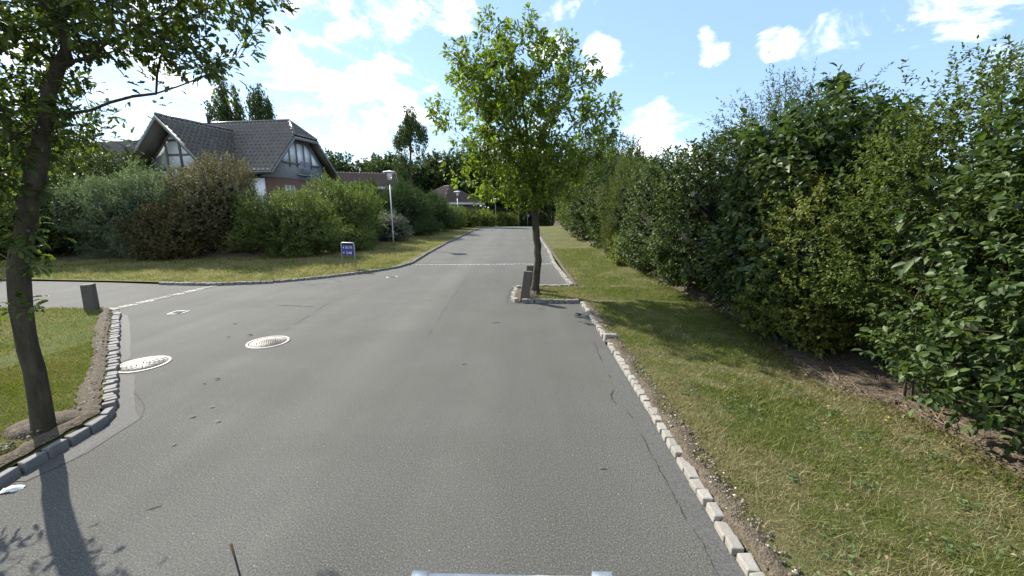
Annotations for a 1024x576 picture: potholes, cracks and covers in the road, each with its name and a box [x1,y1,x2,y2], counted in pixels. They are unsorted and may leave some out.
manhole cover [117,356,172,374]
manhole cover [245,336,290,349]
crack [594,343,719,575]
